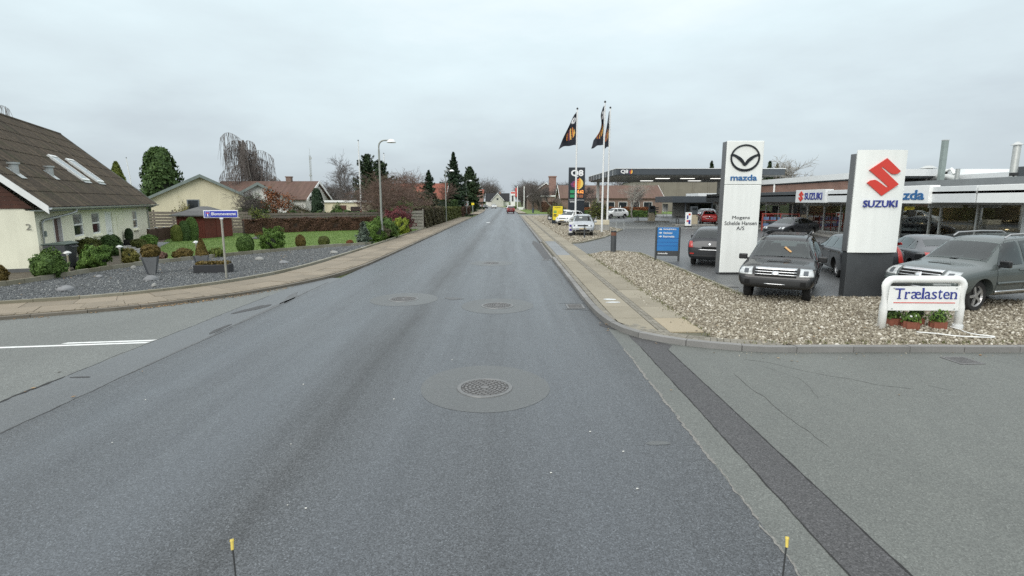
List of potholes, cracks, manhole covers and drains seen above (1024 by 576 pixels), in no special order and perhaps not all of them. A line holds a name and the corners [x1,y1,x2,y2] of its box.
crack [737,359,911,449]
manhole cover [457,378,513,398]
drain grate [940,356,985,365]
